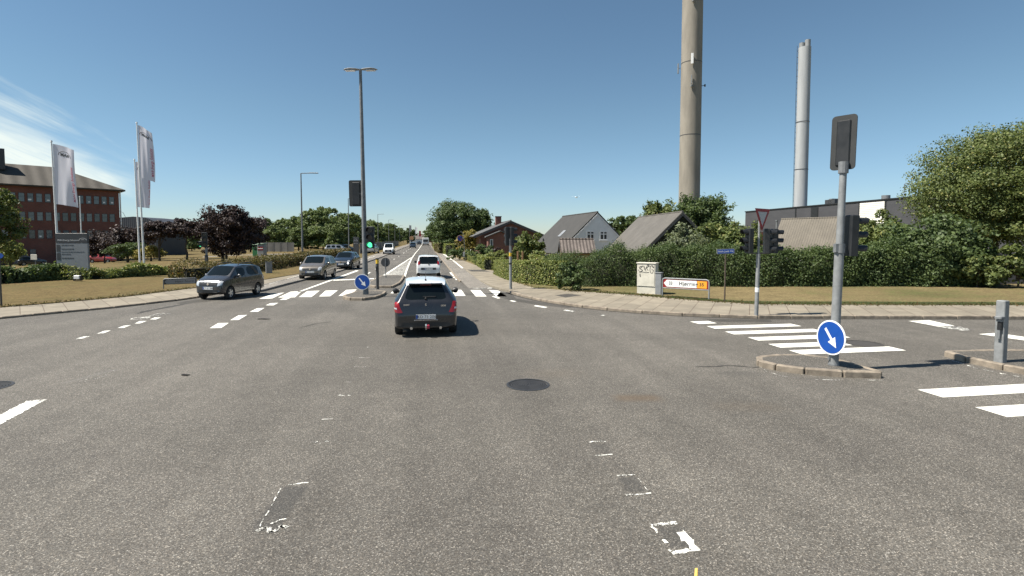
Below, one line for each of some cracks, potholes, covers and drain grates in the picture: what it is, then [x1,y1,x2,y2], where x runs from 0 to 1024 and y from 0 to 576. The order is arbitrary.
manhole cover [506,379,550,391]
